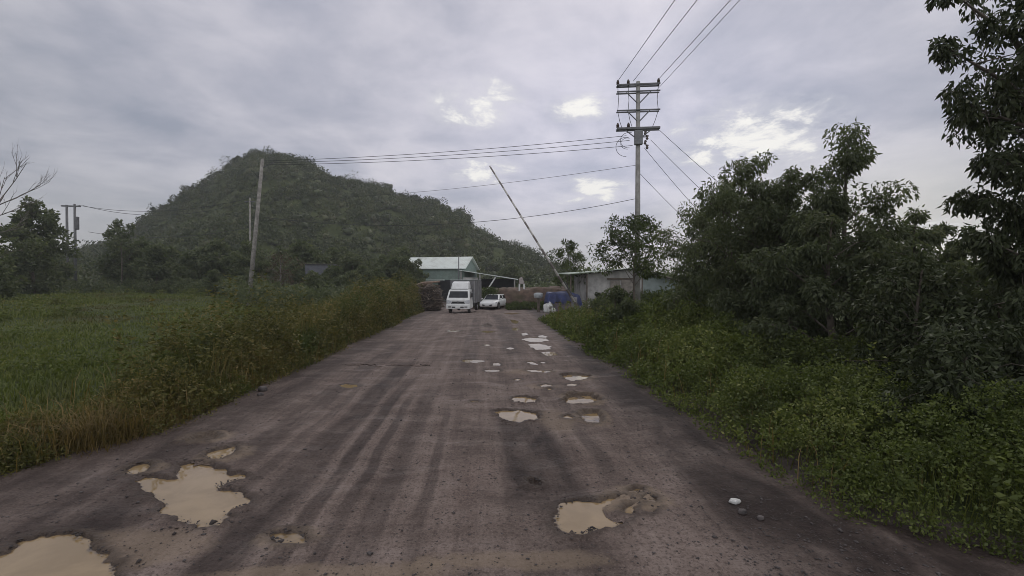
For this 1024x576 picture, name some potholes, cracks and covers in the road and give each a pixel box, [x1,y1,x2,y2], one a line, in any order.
pothole [617,482,655,500]
pothole [630,490,671,508]
pothole [502,394,546,405]
pothole [116,458,268,535]
pothole [0,525,142,576]
pothole [567,407,614,427]
pothole [602,498,672,523]
pothole [555,390,610,406]
pothole [333,382,366,390]
pothole [486,407,548,426]
